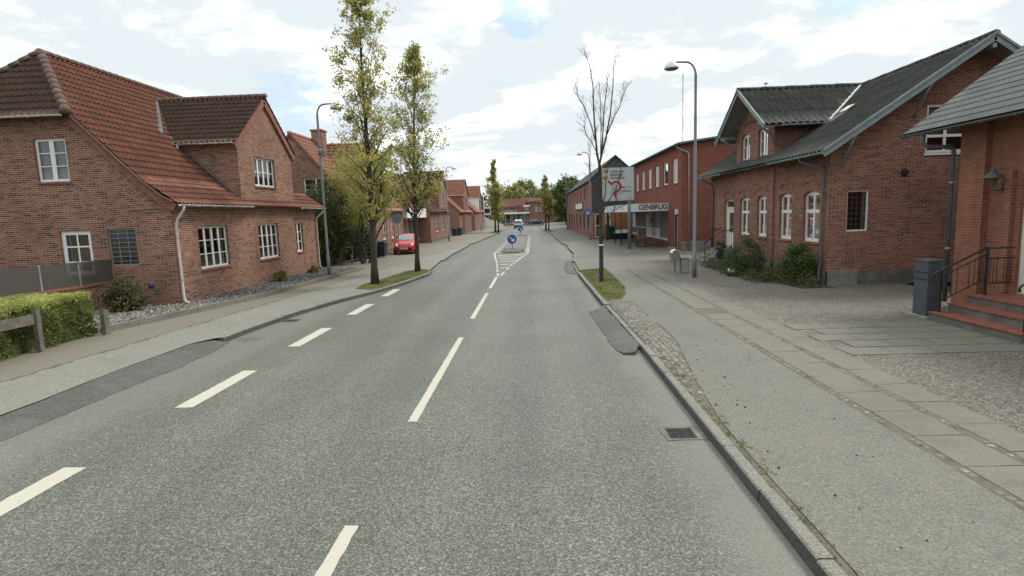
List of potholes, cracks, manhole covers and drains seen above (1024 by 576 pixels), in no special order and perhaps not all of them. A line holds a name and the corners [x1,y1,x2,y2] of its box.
drain grate [659,426,709,441]
